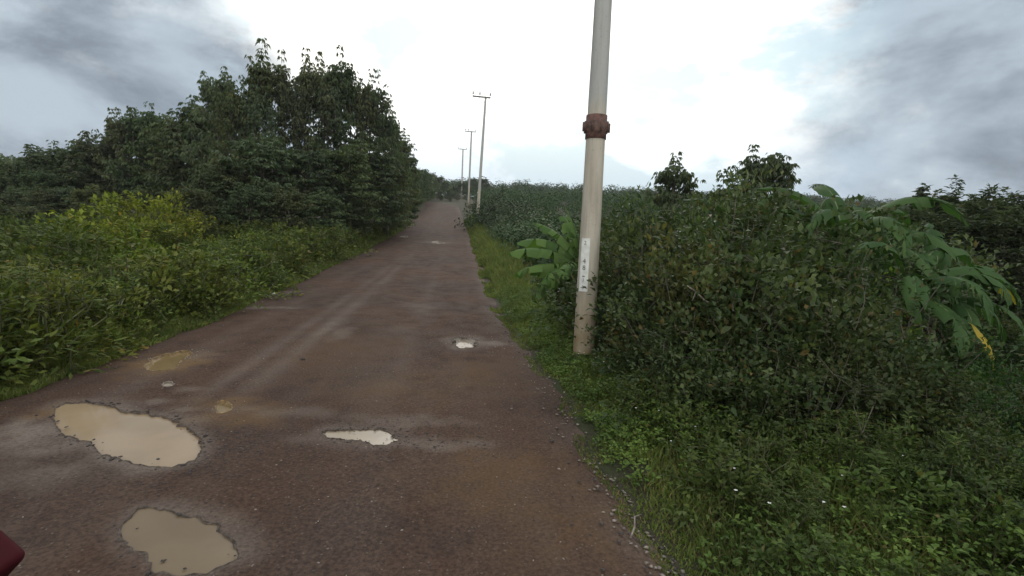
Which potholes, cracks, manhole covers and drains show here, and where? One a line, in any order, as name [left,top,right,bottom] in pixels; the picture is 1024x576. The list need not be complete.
pothole [118,506,241,576]
pothole [143,350,192,371]
pothole [451,337,479,349]
pothole [52,401,204,468]
pothole [214,400,233,414]
pothole [319,428,400,446]
